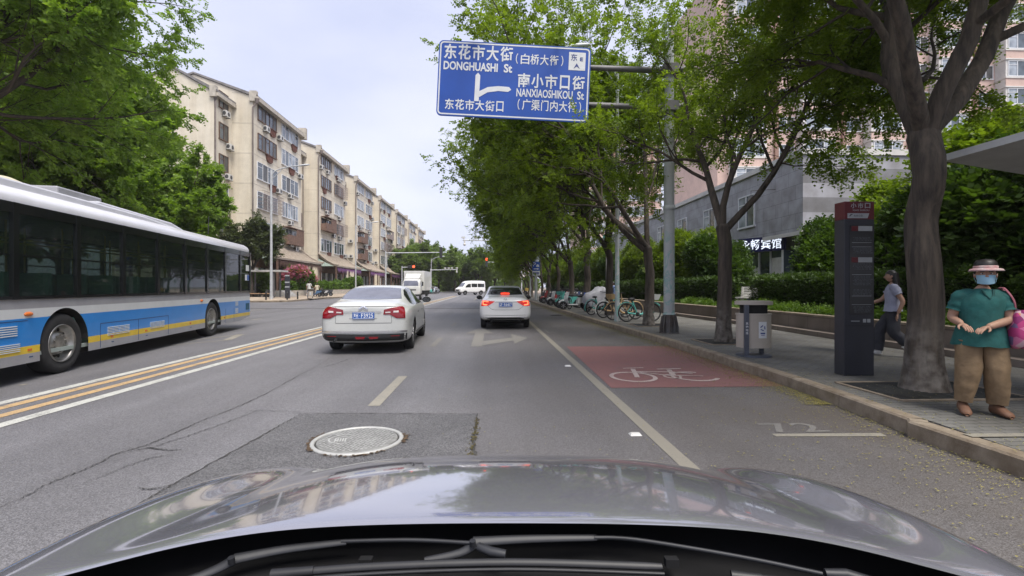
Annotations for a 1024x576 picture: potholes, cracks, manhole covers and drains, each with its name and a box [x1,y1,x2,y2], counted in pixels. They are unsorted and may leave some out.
manhole cover [309,426,404,456]
